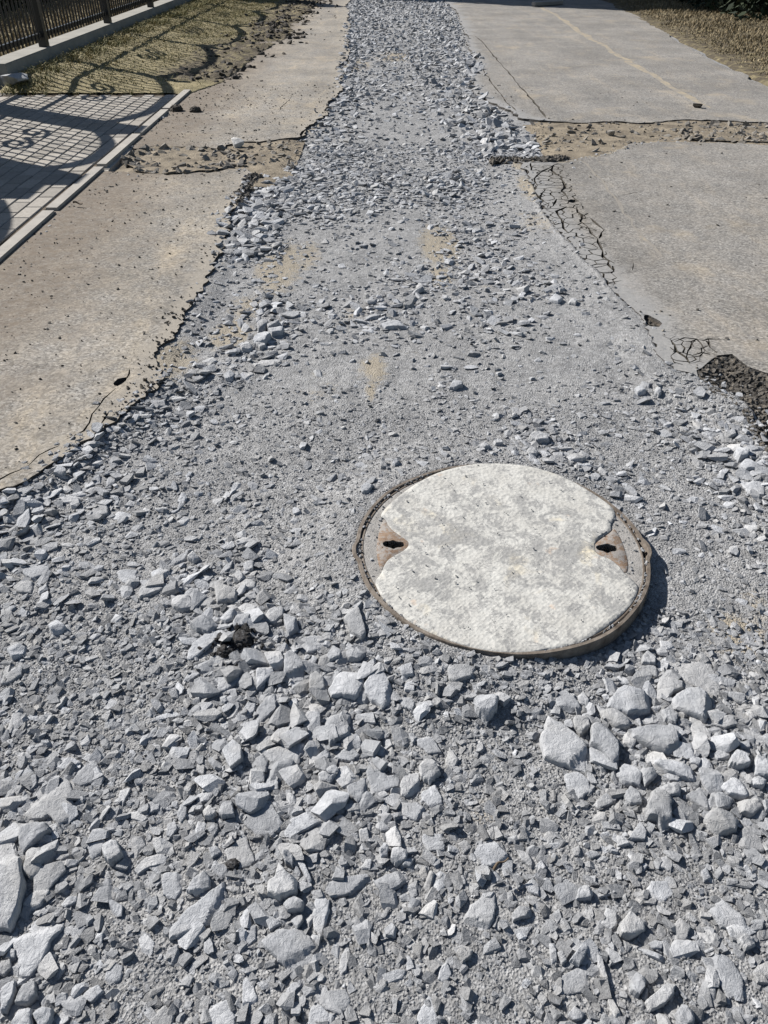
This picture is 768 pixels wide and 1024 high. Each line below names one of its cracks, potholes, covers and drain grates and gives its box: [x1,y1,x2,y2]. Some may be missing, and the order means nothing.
pothole [696,354,768,452]
pothole [644,315,662,327]
crack [666,336,717,365]
crack [0,369,136,480]
crack [530,162,636,284]
manhole cover [352,463,652,660]
